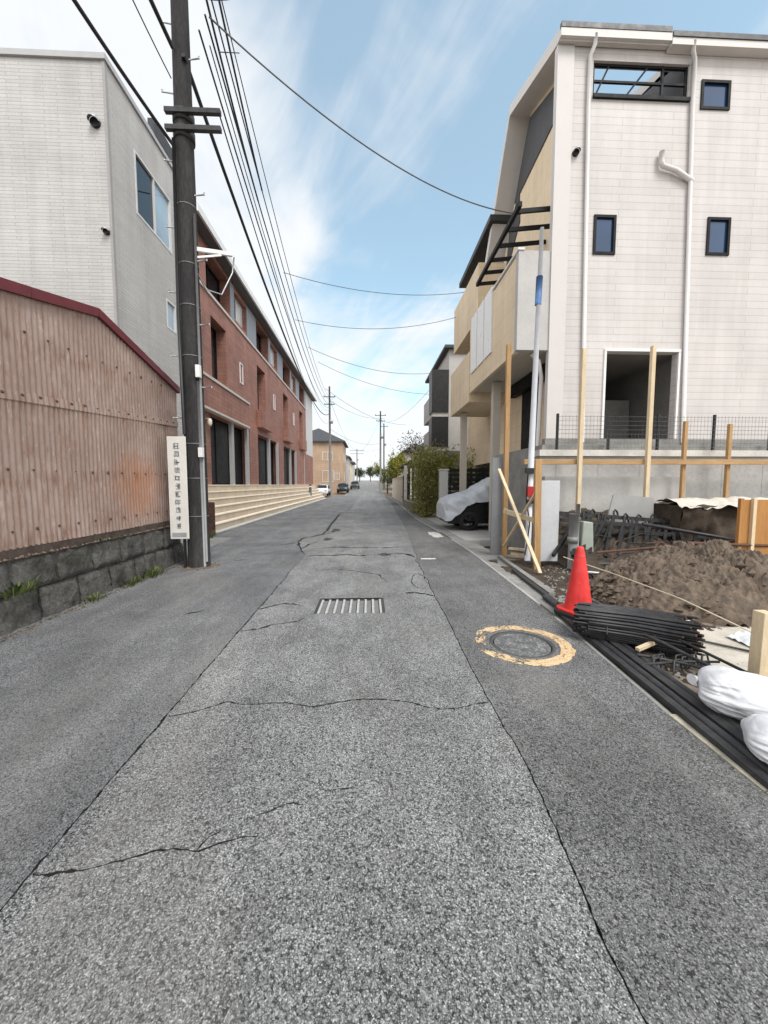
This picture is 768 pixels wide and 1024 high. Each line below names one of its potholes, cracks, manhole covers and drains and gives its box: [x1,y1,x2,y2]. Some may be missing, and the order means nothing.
manhole cover [489,632,556,658]
drain grate [314,598,385,614]
crack [0,512,648,1024]
